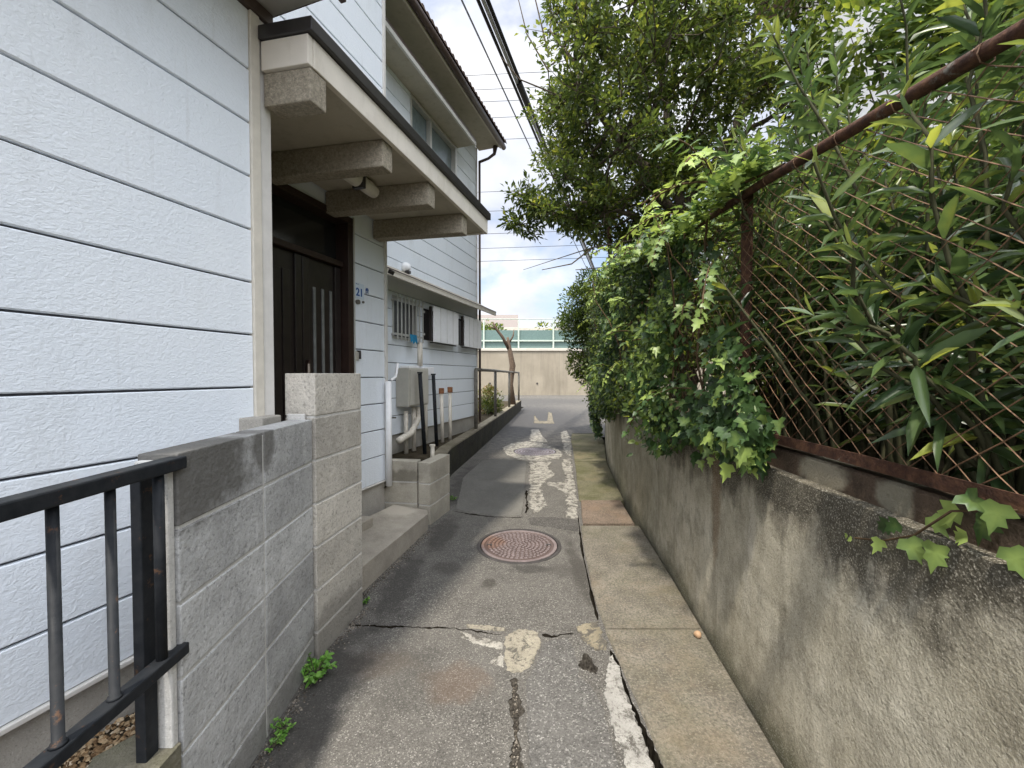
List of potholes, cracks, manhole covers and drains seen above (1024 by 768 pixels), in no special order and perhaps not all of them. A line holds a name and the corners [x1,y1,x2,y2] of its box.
crack [455,490,529,518]
crack [610,651,663,768]
crack [508,678,525,768]
crack [349,624,496,635]
pothole [578,653,598,675]
manhole cover [513,447,556,456]
manhole cover [477,529,562,565]
